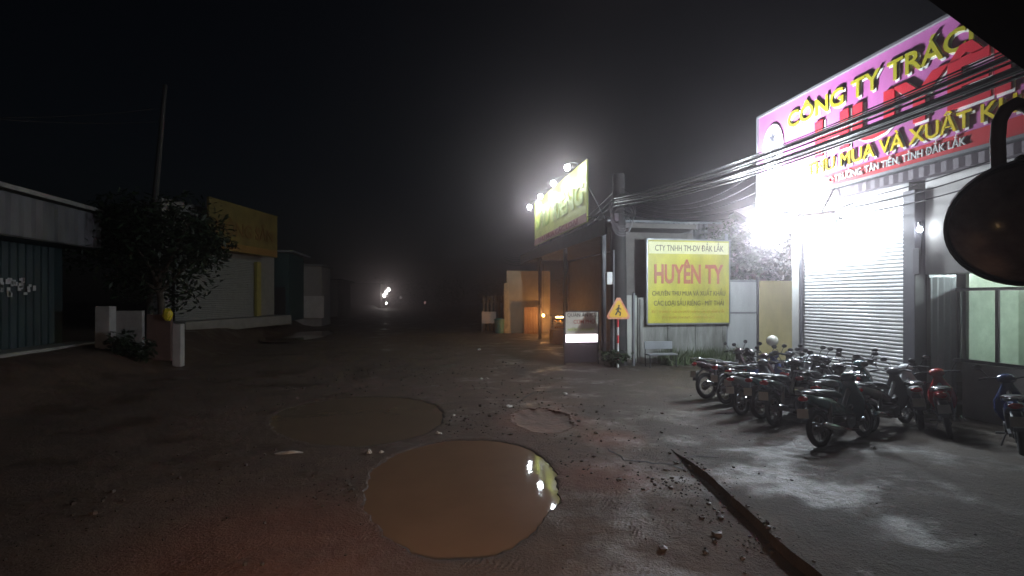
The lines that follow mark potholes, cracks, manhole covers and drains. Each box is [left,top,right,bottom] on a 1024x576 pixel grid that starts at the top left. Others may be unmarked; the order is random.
pothole [261,395,453,449]
pothole [352,436,567,569]
pothole [509,407,578,433]
crack [607,448,718,471]
